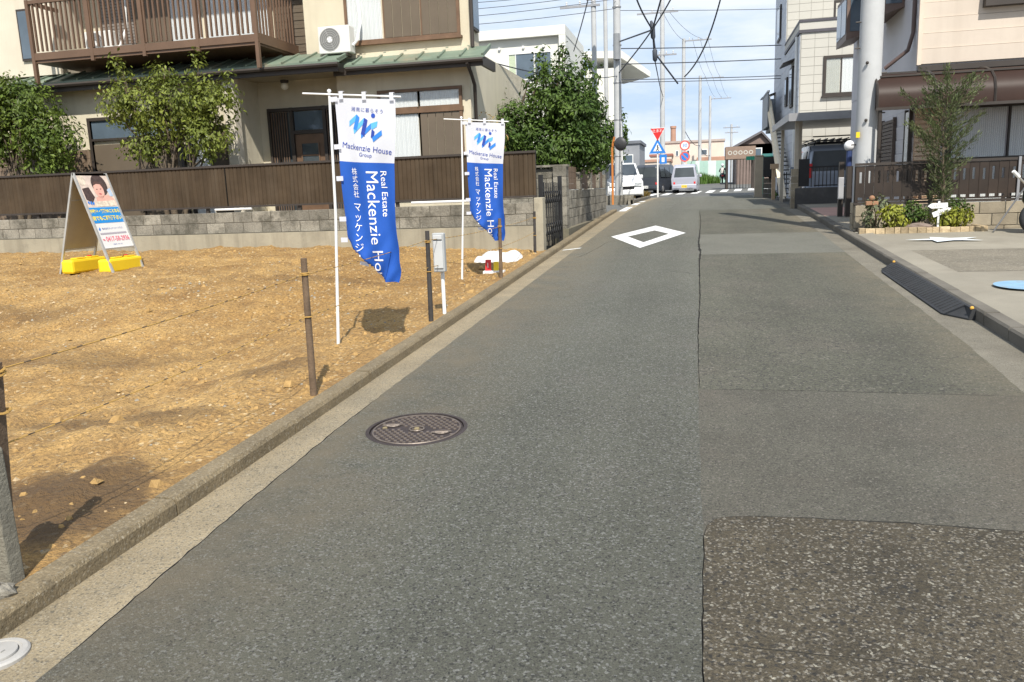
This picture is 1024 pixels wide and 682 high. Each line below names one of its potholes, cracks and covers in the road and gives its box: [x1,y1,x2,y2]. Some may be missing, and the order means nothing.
utility cover [0,637,31,671]
manhole cover [365,413,468,446]
